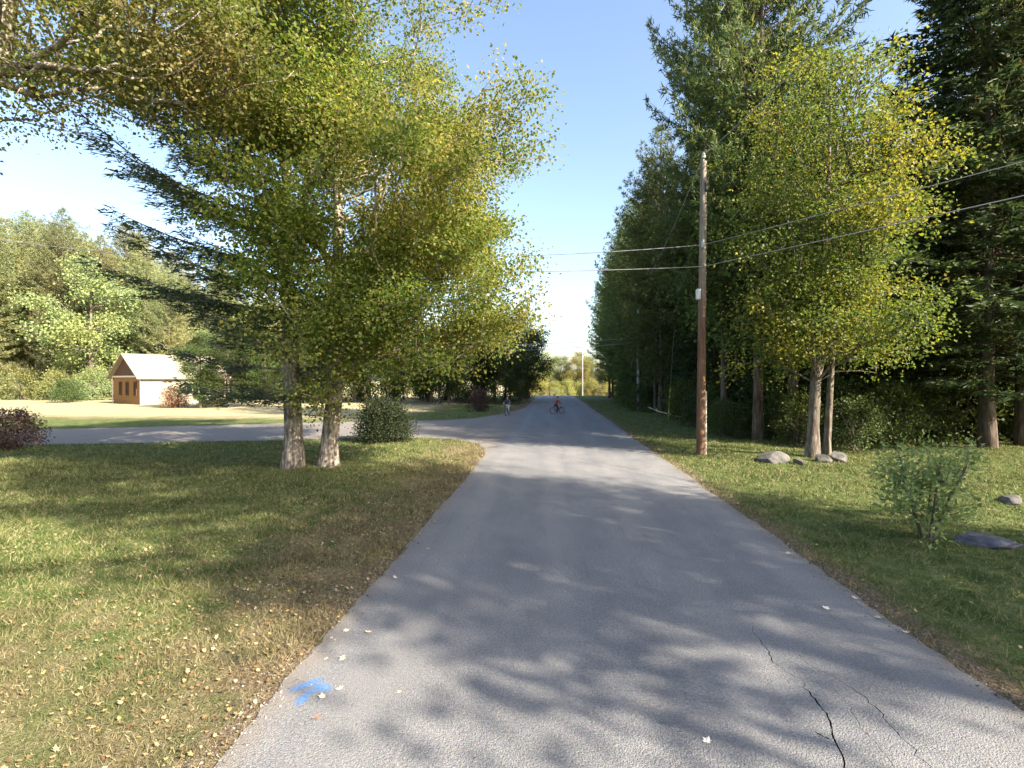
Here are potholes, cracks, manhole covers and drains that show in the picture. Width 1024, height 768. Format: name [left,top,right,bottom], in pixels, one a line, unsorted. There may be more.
crack [752,625,933,768]
